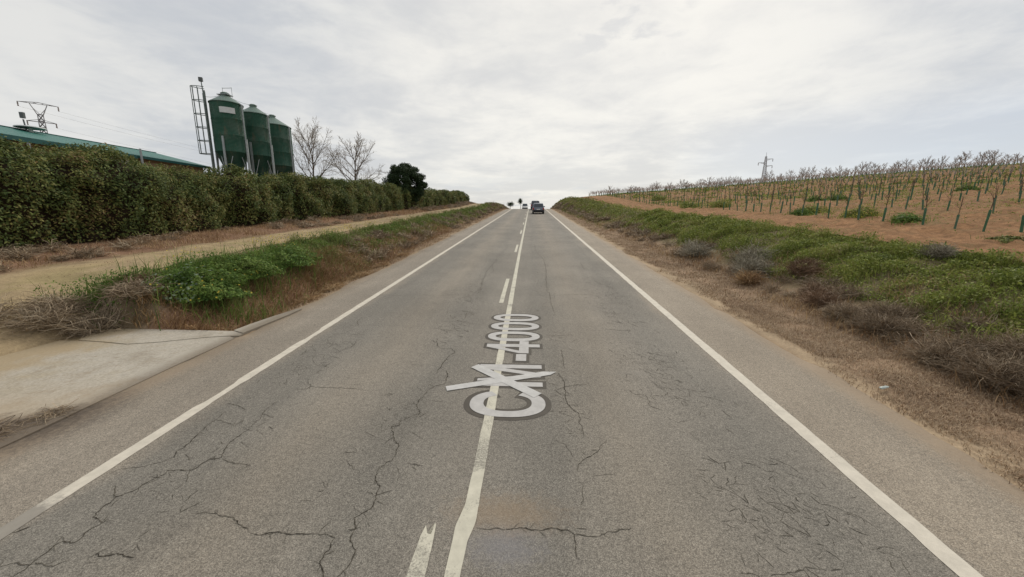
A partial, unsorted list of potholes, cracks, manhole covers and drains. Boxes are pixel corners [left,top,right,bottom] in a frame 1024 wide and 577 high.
crack [0,403,275,577]
crack [197,245,645,577]
crack [610,340,735,441]
